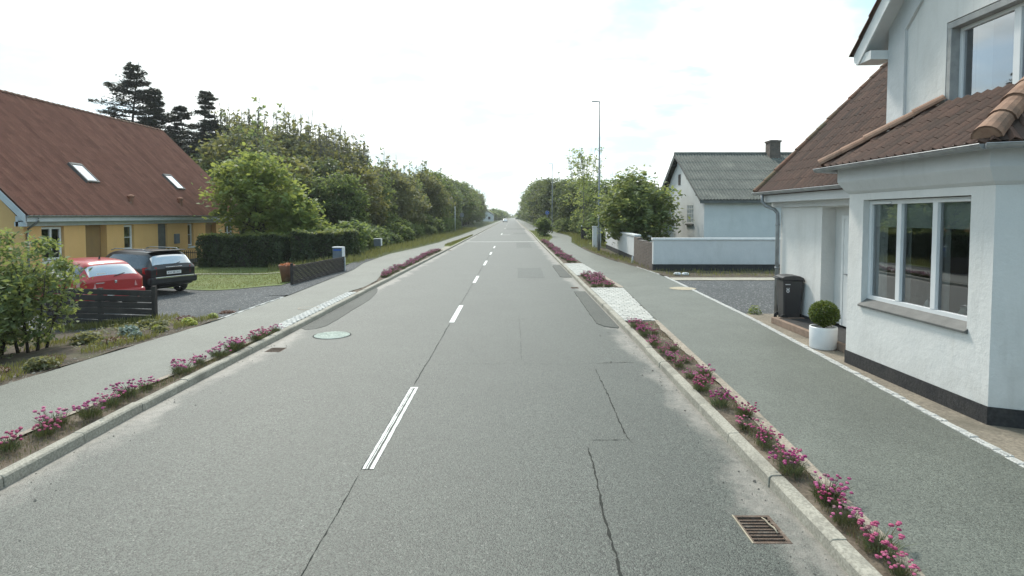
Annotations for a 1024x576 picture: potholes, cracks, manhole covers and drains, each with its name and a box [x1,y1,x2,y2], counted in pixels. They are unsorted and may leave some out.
crack [588,362,633,576]
manhole cover [312,331,351,339]
drain grate [732,515,793,544]
